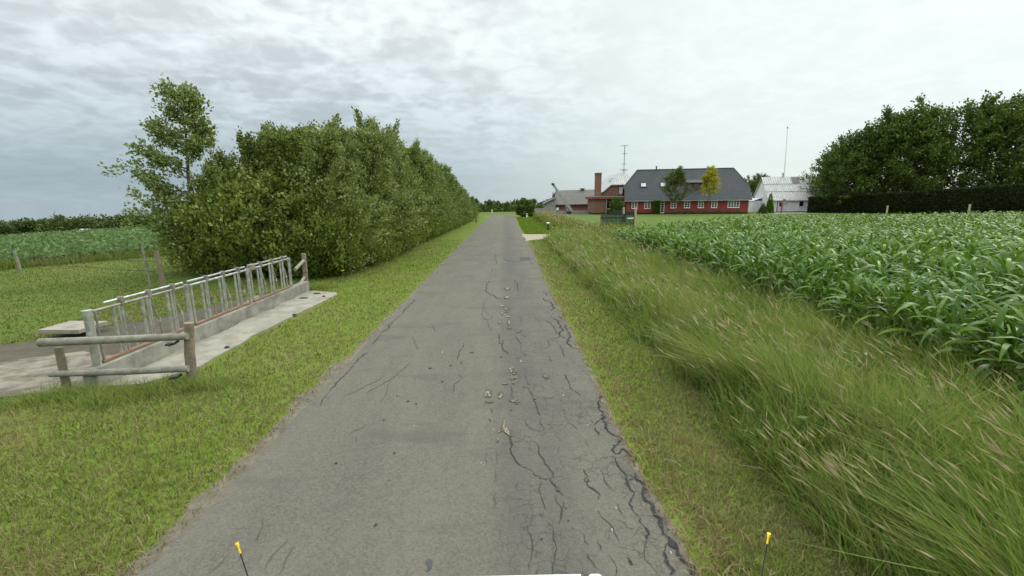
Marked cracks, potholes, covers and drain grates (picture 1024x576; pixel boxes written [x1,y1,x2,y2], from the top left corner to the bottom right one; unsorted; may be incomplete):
crack [482,255,600,574]
crack [583,469,658,574]
crack [320,300,418,405]
